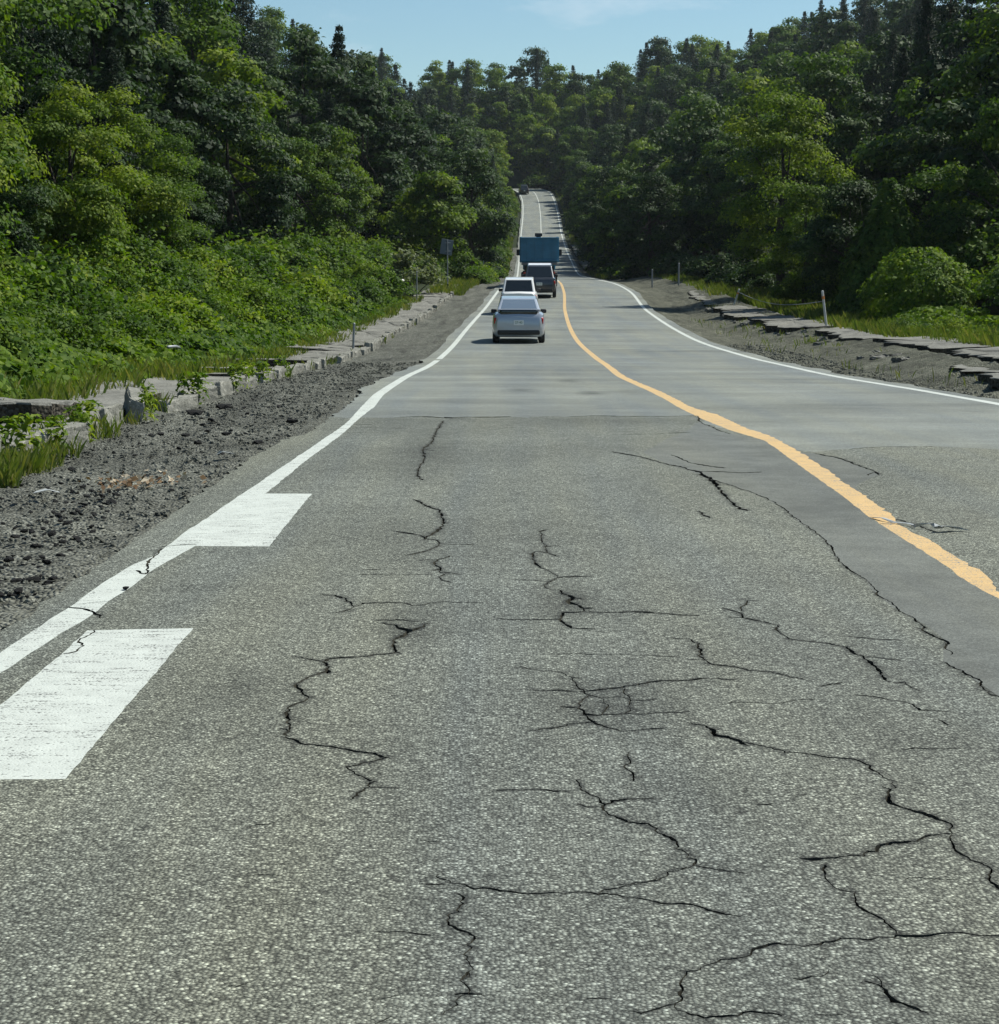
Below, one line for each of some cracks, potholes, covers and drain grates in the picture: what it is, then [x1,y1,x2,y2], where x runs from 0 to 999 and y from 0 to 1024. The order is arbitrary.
crack [283,594,481,800]
crack [499,530,700,629]
crack [520,600,949,731]
crack [359,421,471,583]
crack [376,752,743,1014]
crack [587,723,999,1019]
